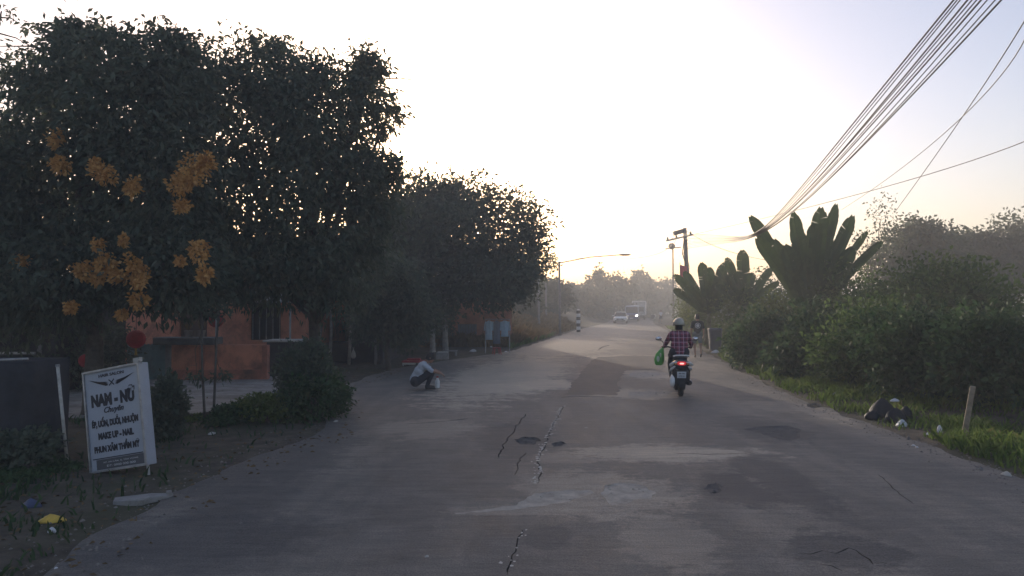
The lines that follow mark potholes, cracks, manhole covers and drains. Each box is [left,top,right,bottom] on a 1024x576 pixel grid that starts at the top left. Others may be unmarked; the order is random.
crack [498,414,526,474]
pothole [704,482,723,494]
pothole [514,437,541,445]
crack [800,548,890,571]
